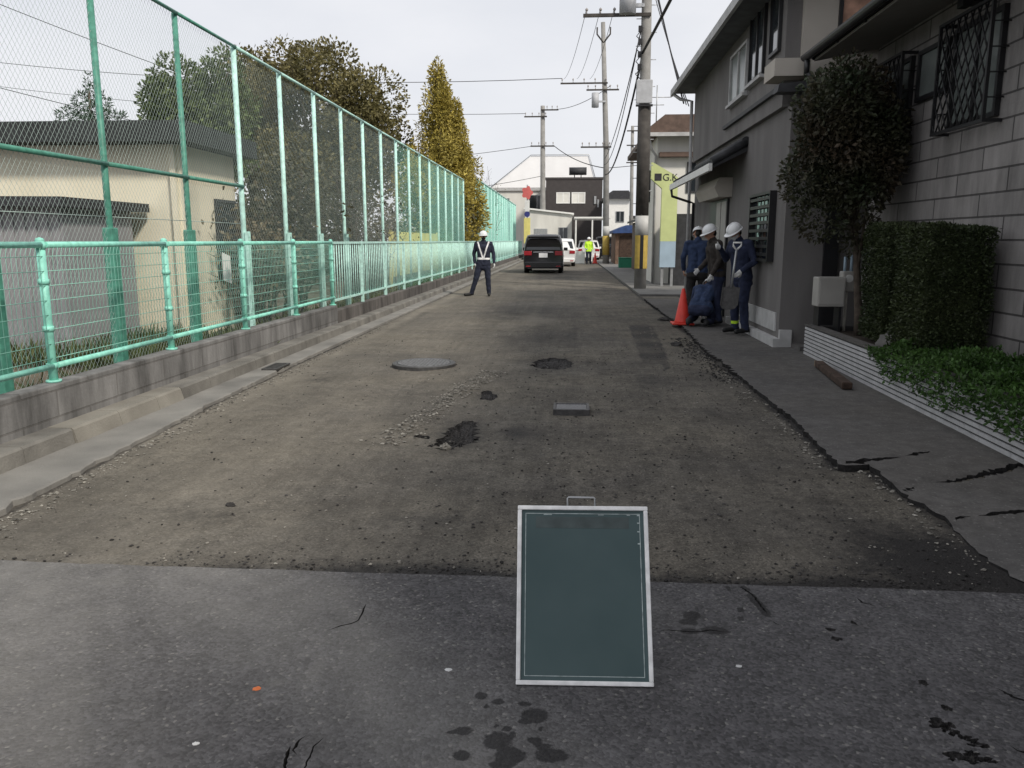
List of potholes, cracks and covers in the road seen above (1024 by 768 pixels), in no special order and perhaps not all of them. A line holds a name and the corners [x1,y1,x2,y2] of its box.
crack [740,587,779,625]
crack [955,510,1024,520]
crack [846,451,1024,483]
pothole [530,358,572,370]
manhole cover [392,358,456,371]
pothole [480,390,498,401]
crack [283,735,323,768]
manhole cover [553,403,590,416]
pothole [429,421,480,449]
